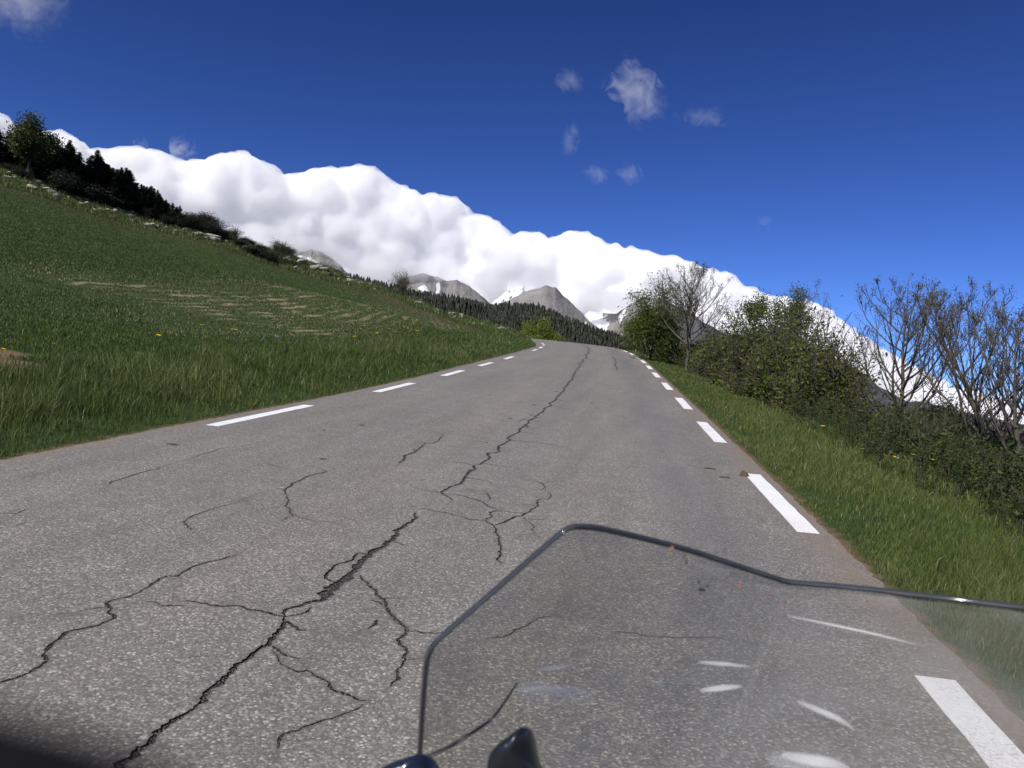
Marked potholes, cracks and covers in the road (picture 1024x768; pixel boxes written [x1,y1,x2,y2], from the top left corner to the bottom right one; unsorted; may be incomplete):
crack [493,616,550,638]
crack [422,345,589,564]
crack [0,464,437,753]
crack [399,435,444,463]
